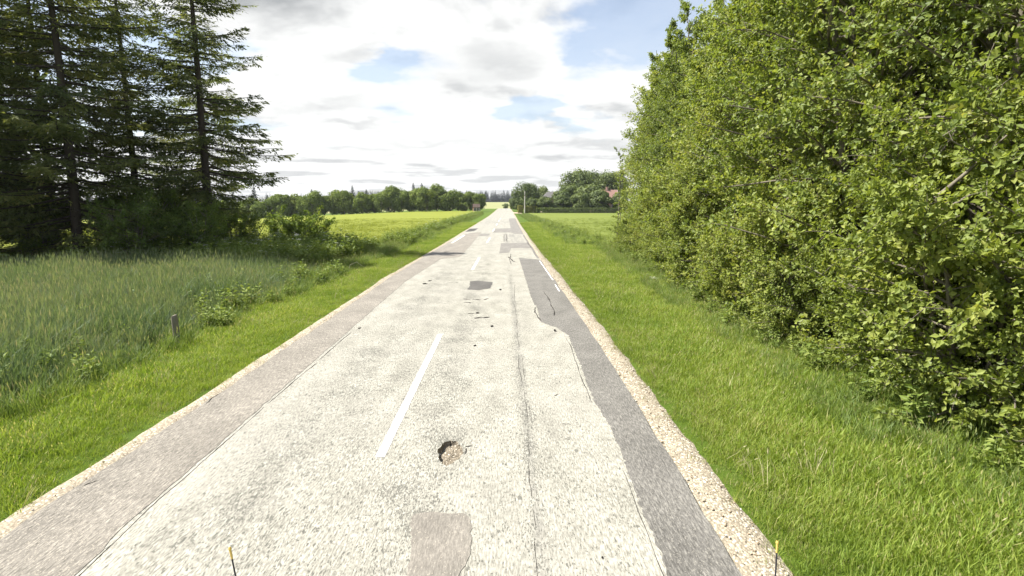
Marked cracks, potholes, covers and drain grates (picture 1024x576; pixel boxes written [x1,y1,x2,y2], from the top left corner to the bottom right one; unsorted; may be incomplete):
pothole [437,440,463,466]
crack [514,291,555,576]
